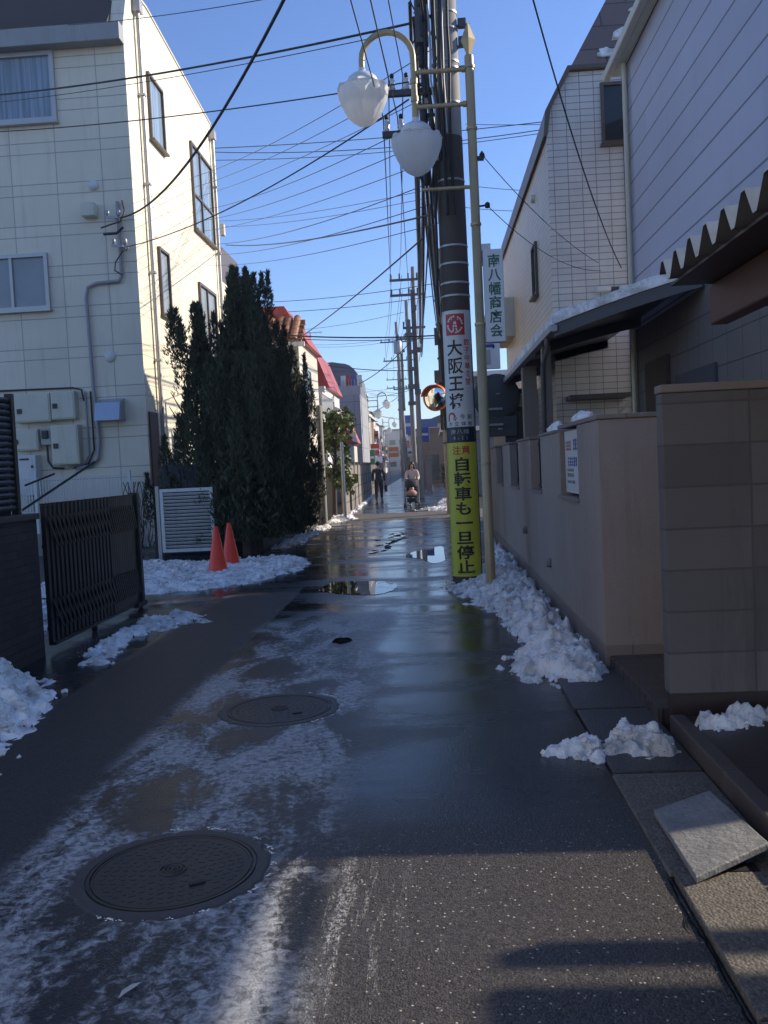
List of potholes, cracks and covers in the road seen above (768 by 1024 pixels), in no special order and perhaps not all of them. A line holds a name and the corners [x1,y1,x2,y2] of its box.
manhole cover [67,830,271,923]
manhole cover [217,693,340,728]
